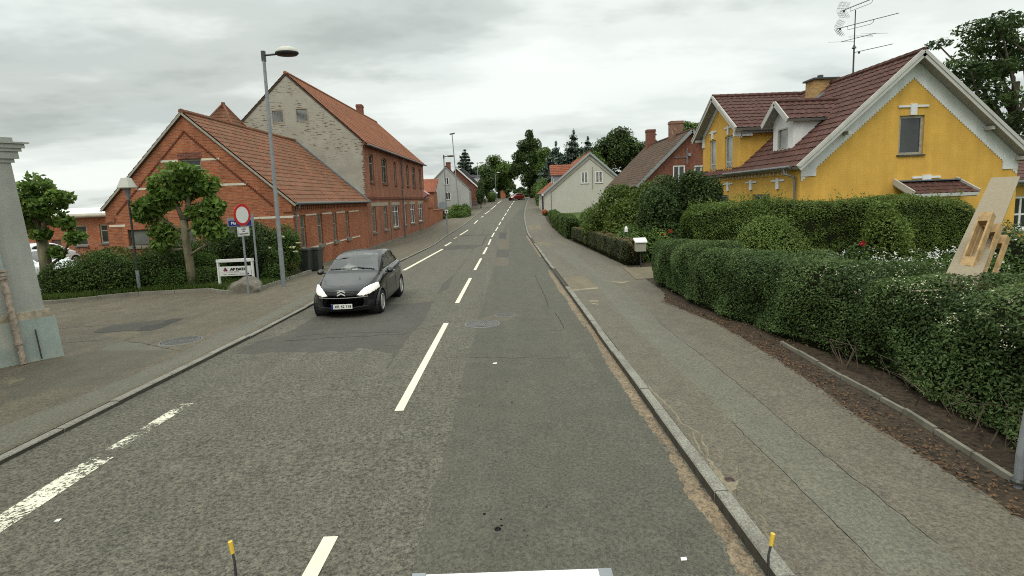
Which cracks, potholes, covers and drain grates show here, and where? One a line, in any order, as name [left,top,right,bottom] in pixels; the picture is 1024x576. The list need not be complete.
manhole cover [157,336,203,346]
manhole cover [465,320,500,328]
